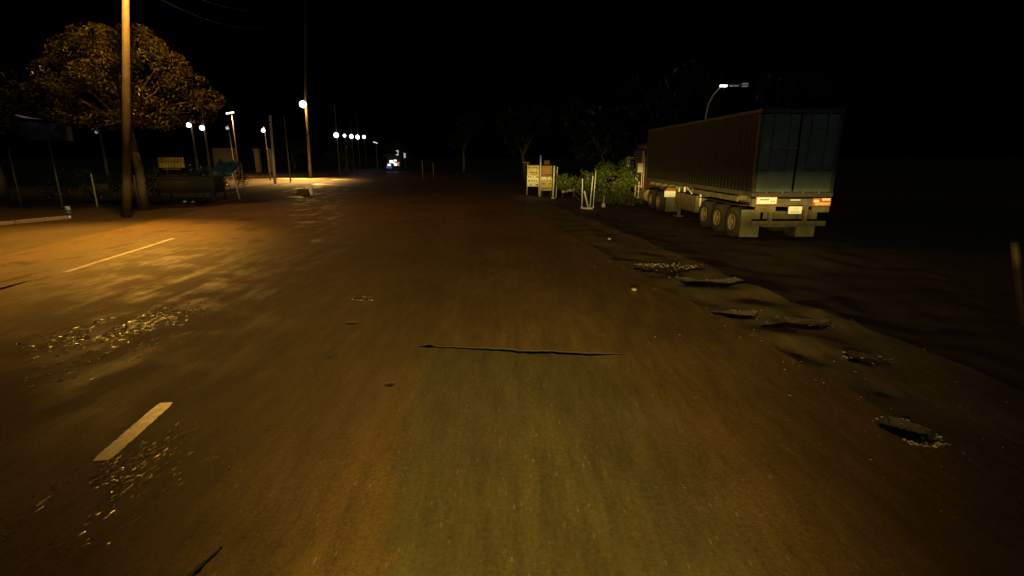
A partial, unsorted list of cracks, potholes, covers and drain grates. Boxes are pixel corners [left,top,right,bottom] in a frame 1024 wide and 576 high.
crack [419,343,626,356]
pothole [631,263,706,274]
pothole [668,276,757,287]
pothole [872,416,947,448]
pothole [760,316,838,330]
pothole [842,350,893,367]
pothole [711,309,763,320]
crack [187,547,221,576]
